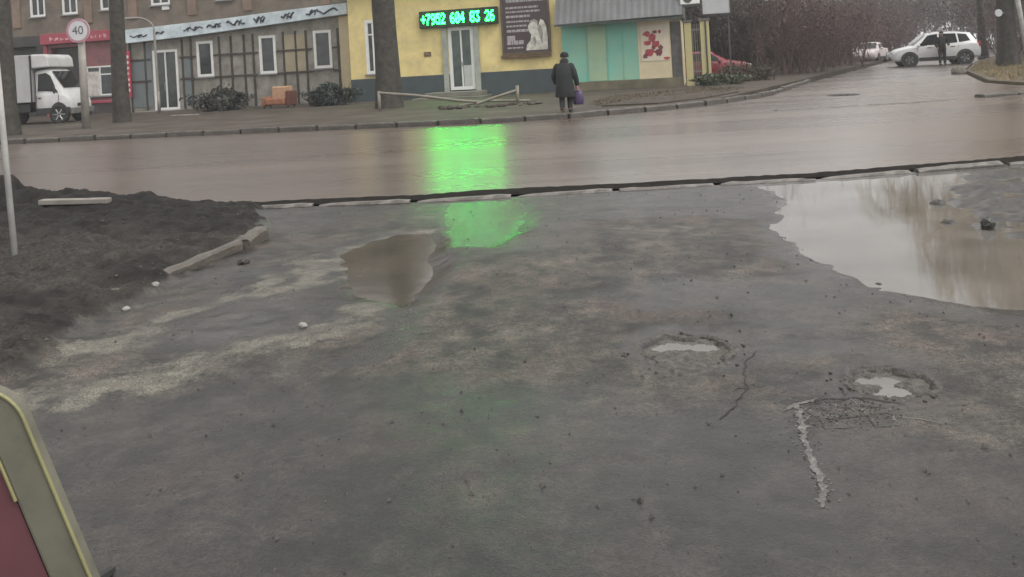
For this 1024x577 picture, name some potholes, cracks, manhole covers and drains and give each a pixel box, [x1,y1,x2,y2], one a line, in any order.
pothole [826,365,943,402]
crack [720,350,757,419]
pothole [621,331,746,376]
crack [734,387,983,509]
